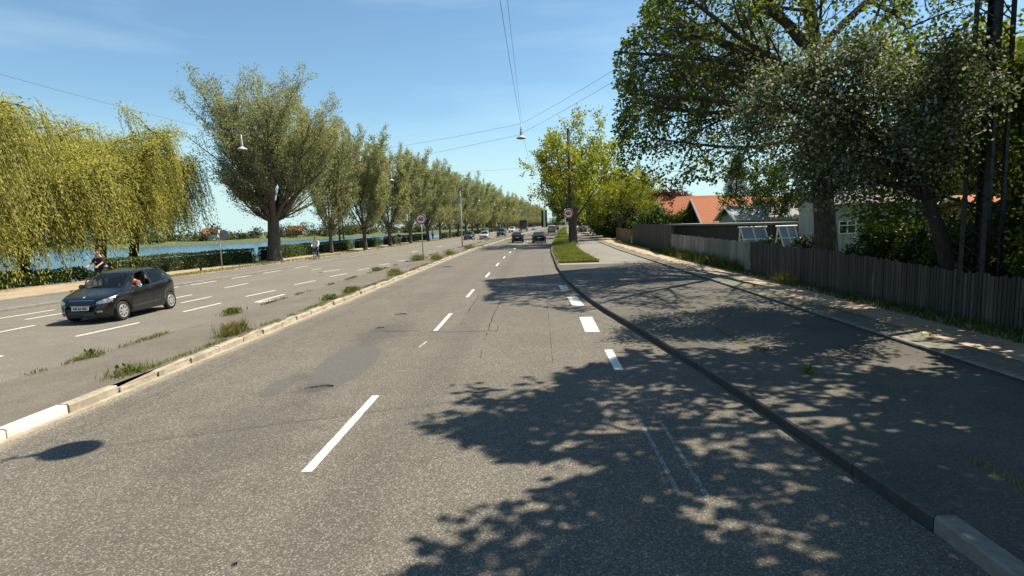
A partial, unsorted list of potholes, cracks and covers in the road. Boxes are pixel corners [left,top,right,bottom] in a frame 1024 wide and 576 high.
crack [460,295,501,358]
pothole [304,384,334,393]
